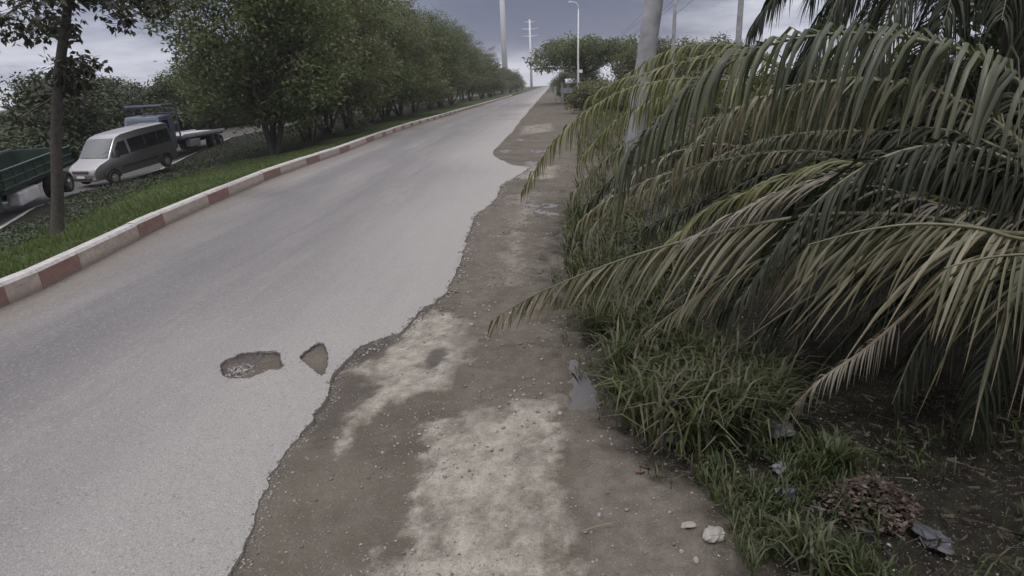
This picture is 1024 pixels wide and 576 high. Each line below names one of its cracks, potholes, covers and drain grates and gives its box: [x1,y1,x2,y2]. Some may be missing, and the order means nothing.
pothole [221,352,283,379]
